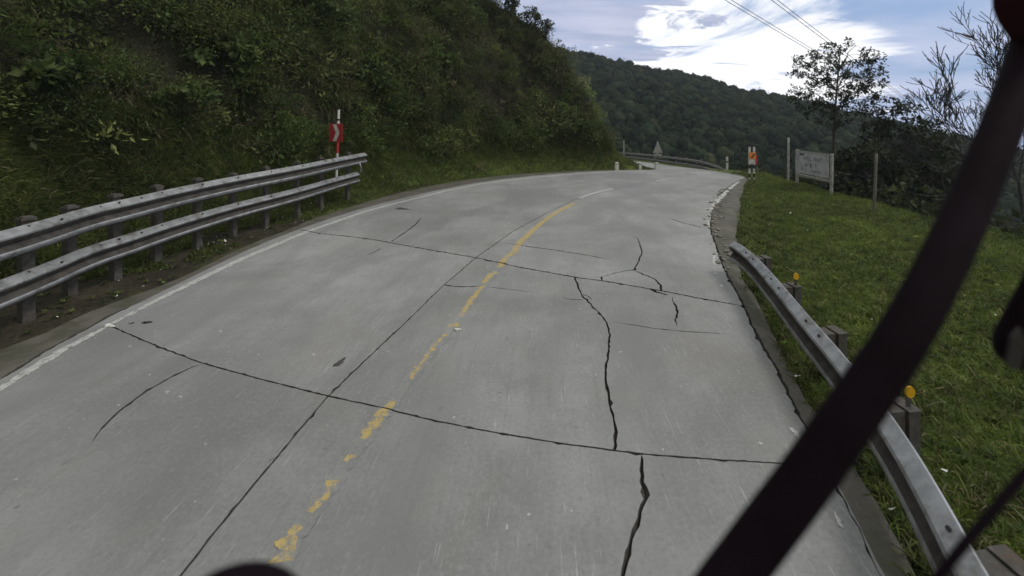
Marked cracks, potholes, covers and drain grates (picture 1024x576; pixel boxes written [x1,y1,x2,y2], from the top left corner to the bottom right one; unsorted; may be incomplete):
crack [92,364,202,442]
crack [507,236,719,576]
